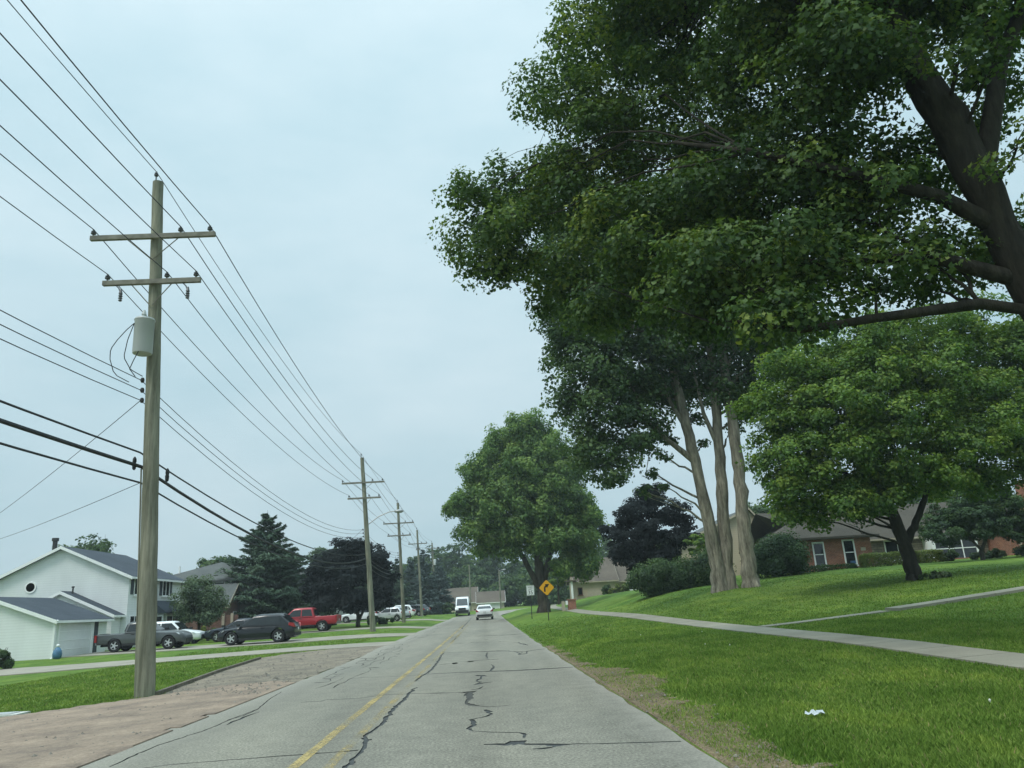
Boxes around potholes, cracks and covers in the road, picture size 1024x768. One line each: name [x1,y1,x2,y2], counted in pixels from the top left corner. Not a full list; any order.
crack [146,621,681,768]
